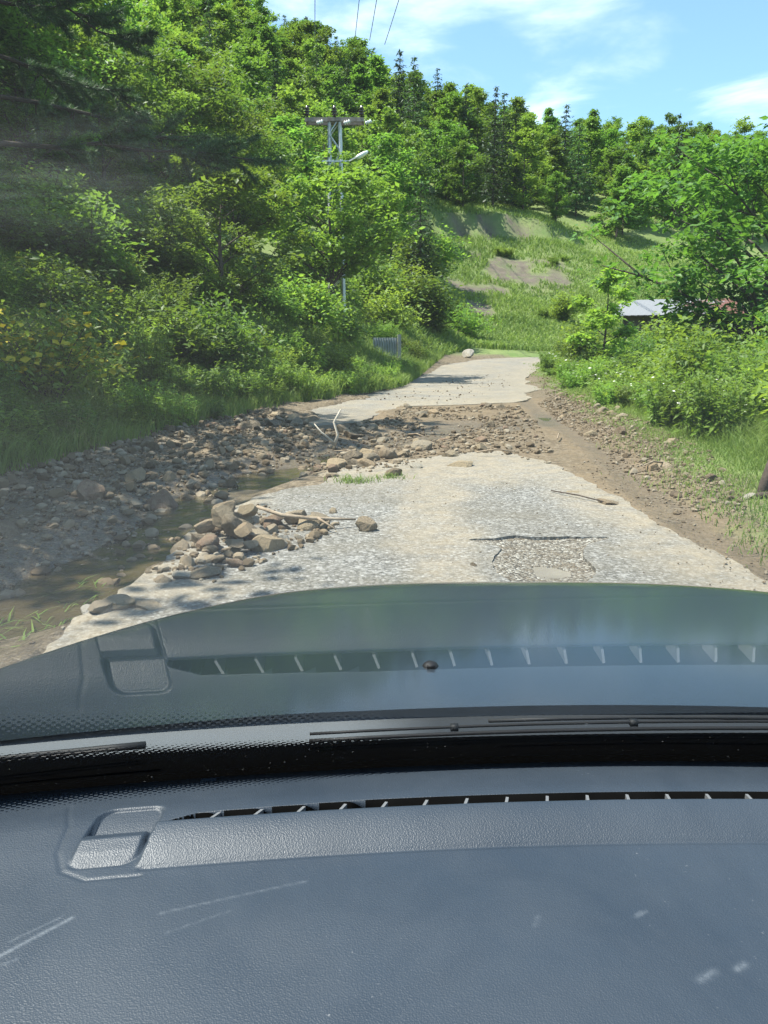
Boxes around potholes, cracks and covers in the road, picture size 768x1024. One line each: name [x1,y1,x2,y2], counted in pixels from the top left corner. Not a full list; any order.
pothole [473,538,608,582]
